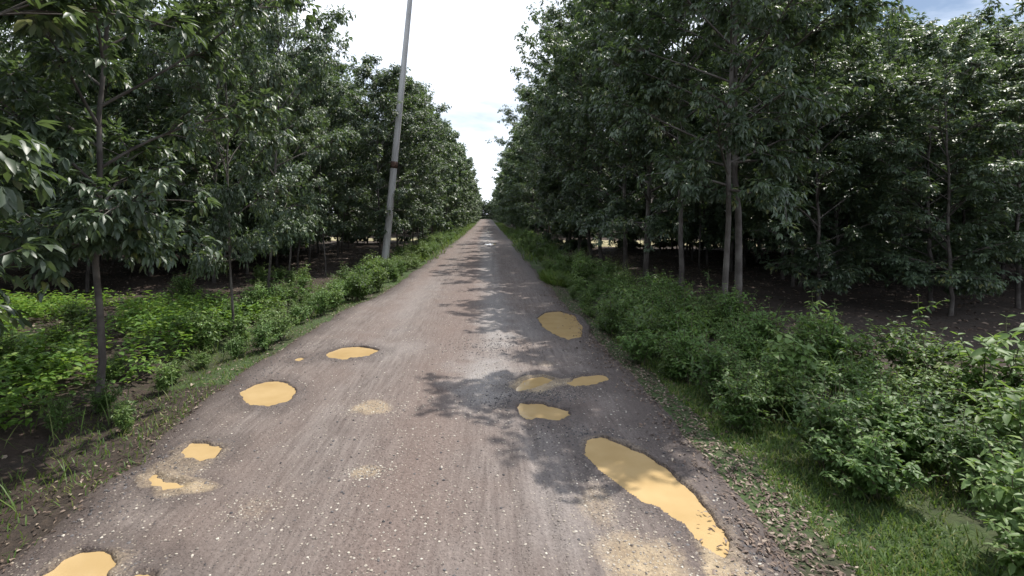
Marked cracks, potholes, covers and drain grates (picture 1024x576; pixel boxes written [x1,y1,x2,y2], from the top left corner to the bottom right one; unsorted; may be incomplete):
pothole [229,378,306,411]
pothole [557,372,618,390]
pothole [126,465,208,500]
pothole [571,433,751,571]
pothole [317,345,386,362]
pothole [17,539,140,576]
pothole [161,437,237,468]
pothole [533,310,591,342]
pothole [504,373,563,395]
pothole [506,398,582,425]
